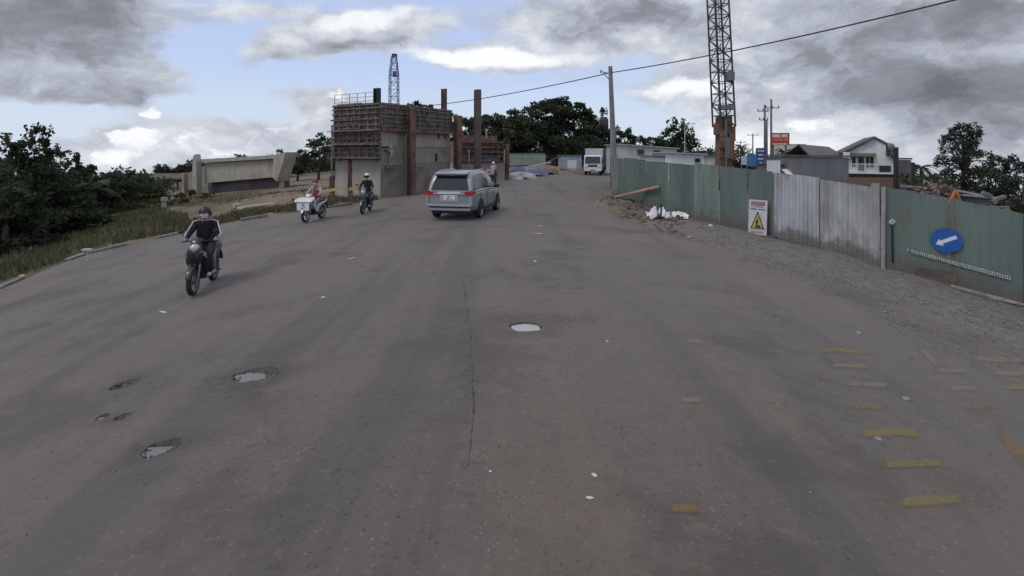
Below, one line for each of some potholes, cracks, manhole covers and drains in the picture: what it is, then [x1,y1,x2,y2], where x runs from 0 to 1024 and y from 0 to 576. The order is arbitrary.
pothole [141,437,182,459]
pothole [231,367,281,383]
crack [437,283,601,468]
pothole [109,378,141,390]
pothole [508,322,542,331]
